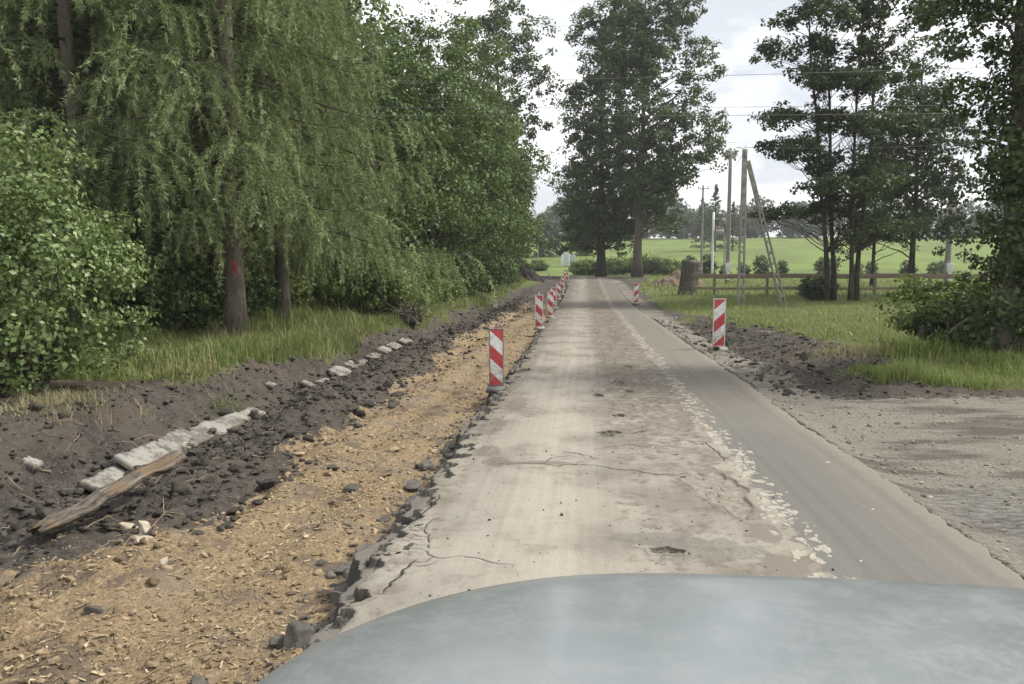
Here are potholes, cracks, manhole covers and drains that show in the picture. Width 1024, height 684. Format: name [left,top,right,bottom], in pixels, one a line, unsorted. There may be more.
crack [496,429,729,477]
pothole [643,545,694,556]
pothole [594,429,625,438]
crack [358,494,517,594]
